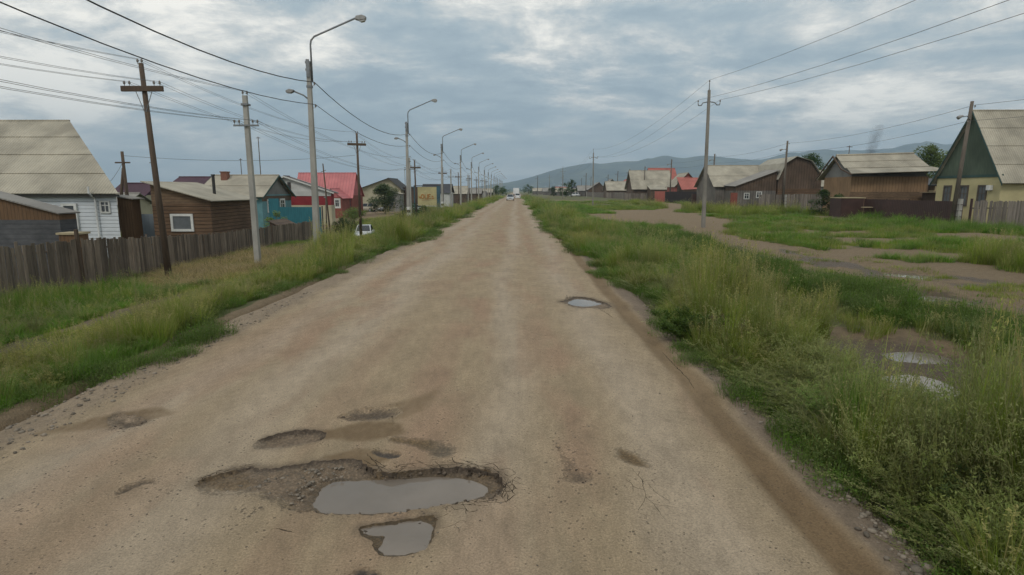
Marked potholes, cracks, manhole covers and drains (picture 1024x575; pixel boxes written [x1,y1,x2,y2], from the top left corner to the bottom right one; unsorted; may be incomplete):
pothole [107,413,149,430]
pothole [337,406,403,422]
pothole [251,429,326,450]
pothole [359,515,438,557]
pothole [385,436,458,459]
pothole [371,450,402,459]
pothole [114,478,156,496]
pothole [561,297,612,309]
pothole [194,458,506,516]
